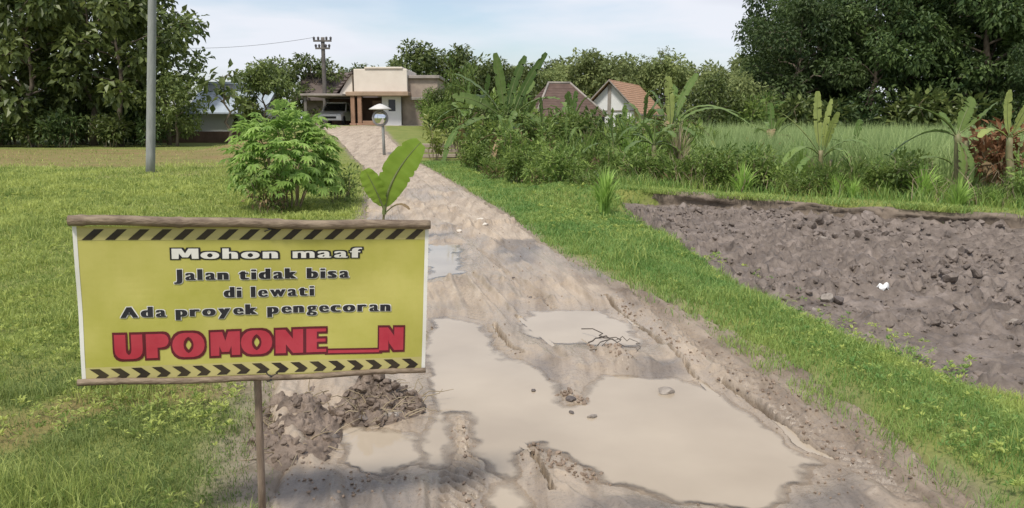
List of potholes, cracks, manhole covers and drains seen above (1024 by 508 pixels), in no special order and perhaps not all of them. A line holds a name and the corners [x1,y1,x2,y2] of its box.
pothole [515,307,658,349]
pothole [414,314,843,508]
pothole [427,243,469,280]
pothole [326,423,423,477]
